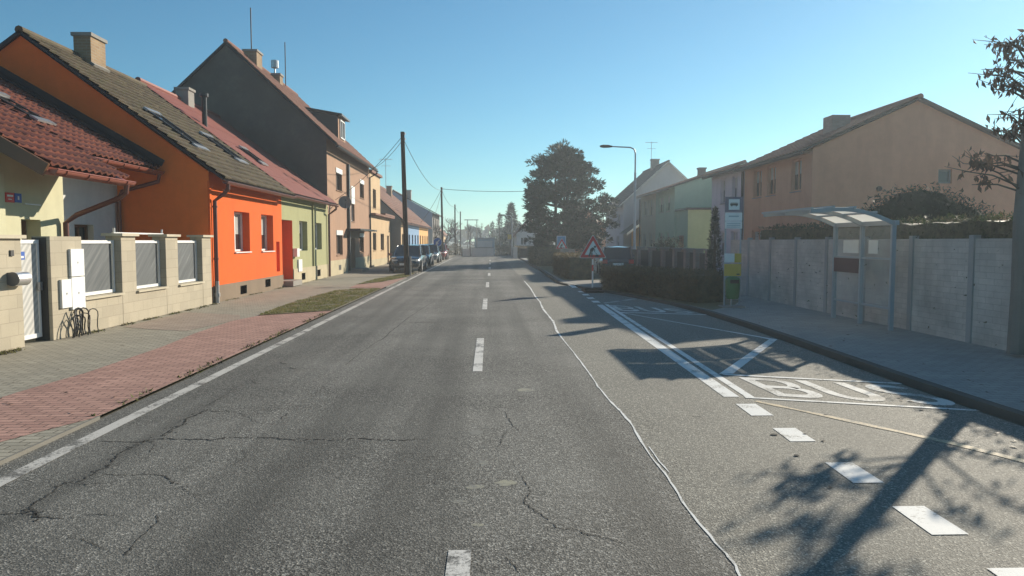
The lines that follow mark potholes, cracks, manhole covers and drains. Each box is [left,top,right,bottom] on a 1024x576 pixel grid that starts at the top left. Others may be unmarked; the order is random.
crack [2,392,414,521]
crack [520,473,623,543]
crack [68,512,159,554]
